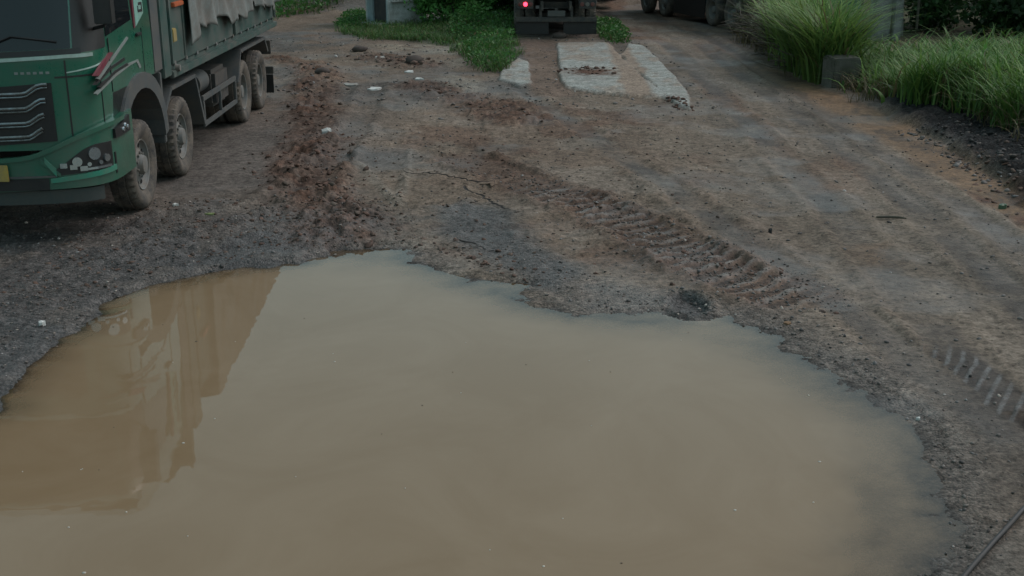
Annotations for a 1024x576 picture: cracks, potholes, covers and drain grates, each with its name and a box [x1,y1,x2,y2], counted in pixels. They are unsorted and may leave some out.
pothole [0,236,1005,576]
crack [398,169,521,214]
